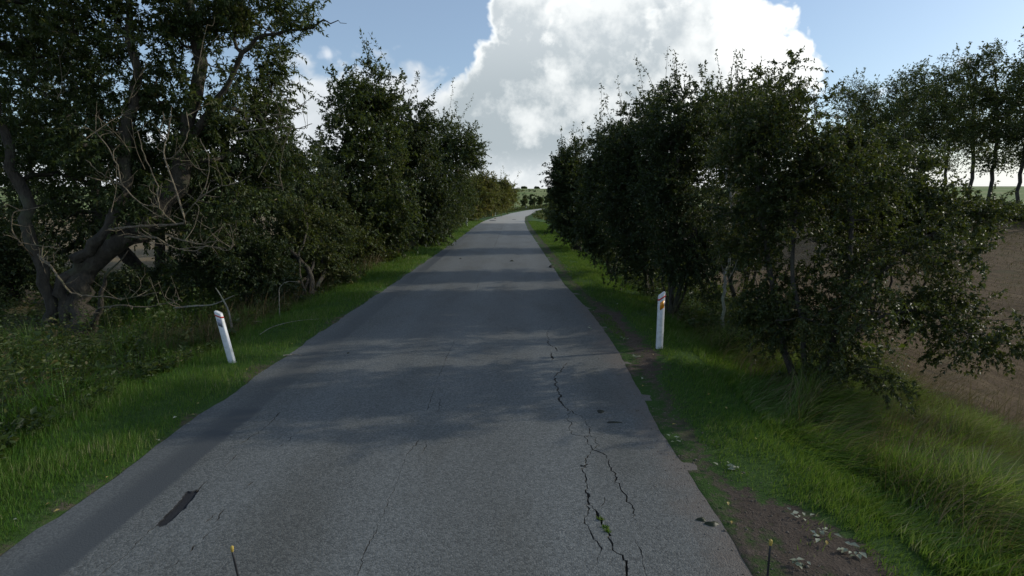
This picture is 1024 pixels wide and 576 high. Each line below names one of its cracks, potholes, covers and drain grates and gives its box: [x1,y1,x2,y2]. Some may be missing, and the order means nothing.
crack [546,327,647,576]
crack [175,413,300,565]
pothole [156,490,199,527]
